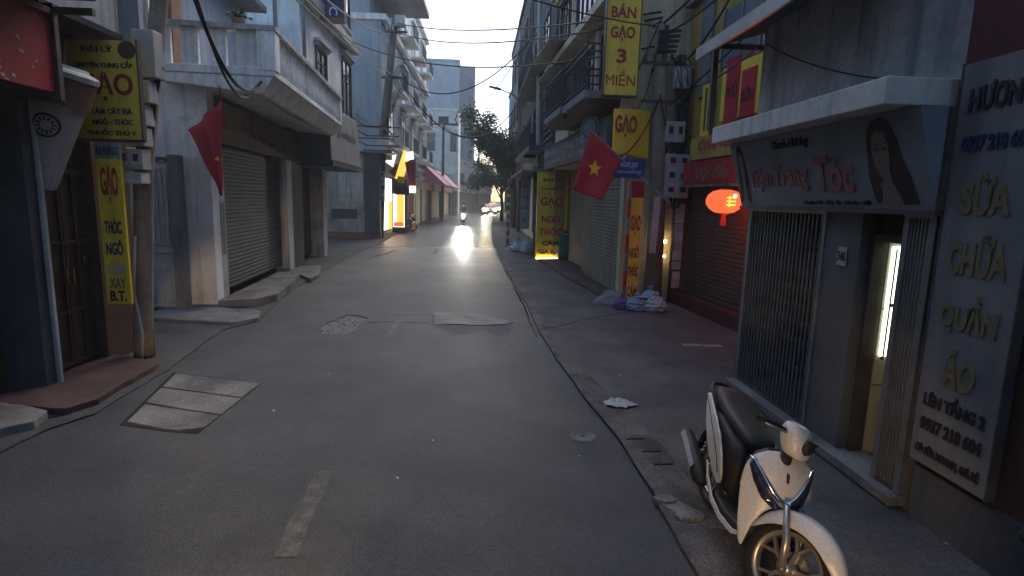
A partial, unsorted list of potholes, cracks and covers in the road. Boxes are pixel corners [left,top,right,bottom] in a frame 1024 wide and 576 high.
manhole cover [570,431,596,442]
pothole [320,314,368,334]
